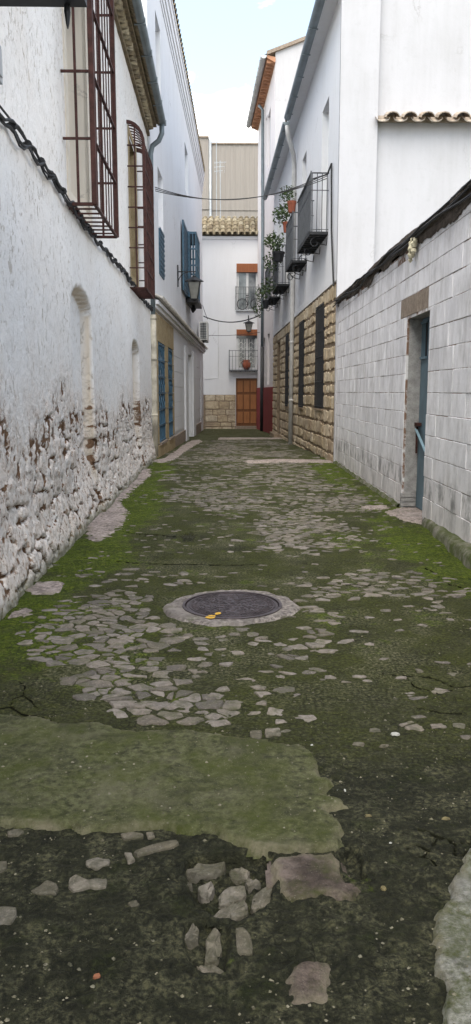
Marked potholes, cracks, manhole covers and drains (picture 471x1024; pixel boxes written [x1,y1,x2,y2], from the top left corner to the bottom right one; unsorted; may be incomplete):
crack [406,828,471,866]
manhole cover [162,589,300,627]
crack [0,682,51,721]
crack [382,673,471,715]
